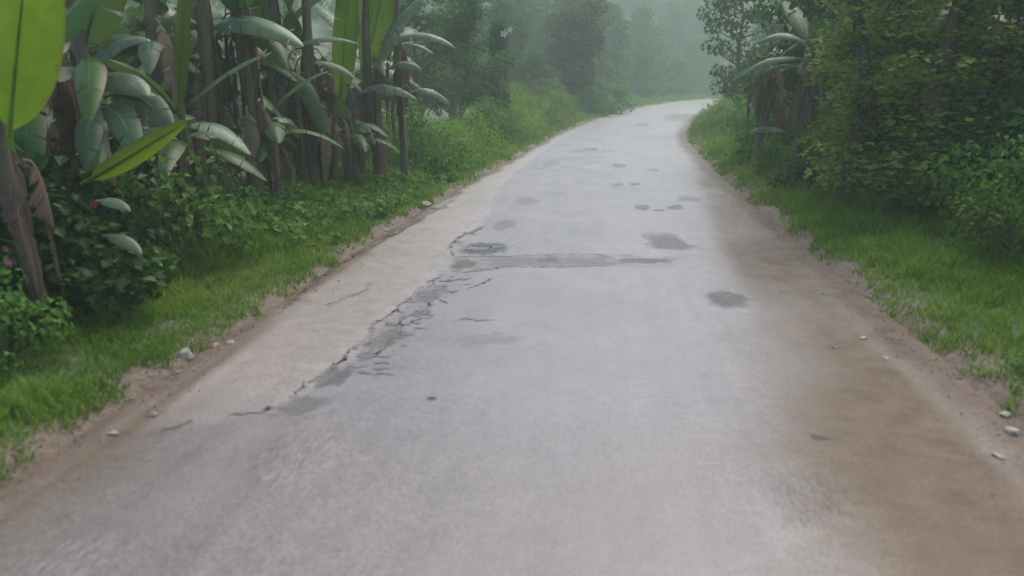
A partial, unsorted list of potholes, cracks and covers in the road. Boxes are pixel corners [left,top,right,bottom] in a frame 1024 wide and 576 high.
pothole [505,193,553,210]
pothole [438,239,530,257]
pothole [661,202,689,212]
crack [227,197,610,416]
pothole [622,228,720,256]
pothole [629,202,655,214]
pothole [690,284,768,314]
crack [161,419,193,431]
